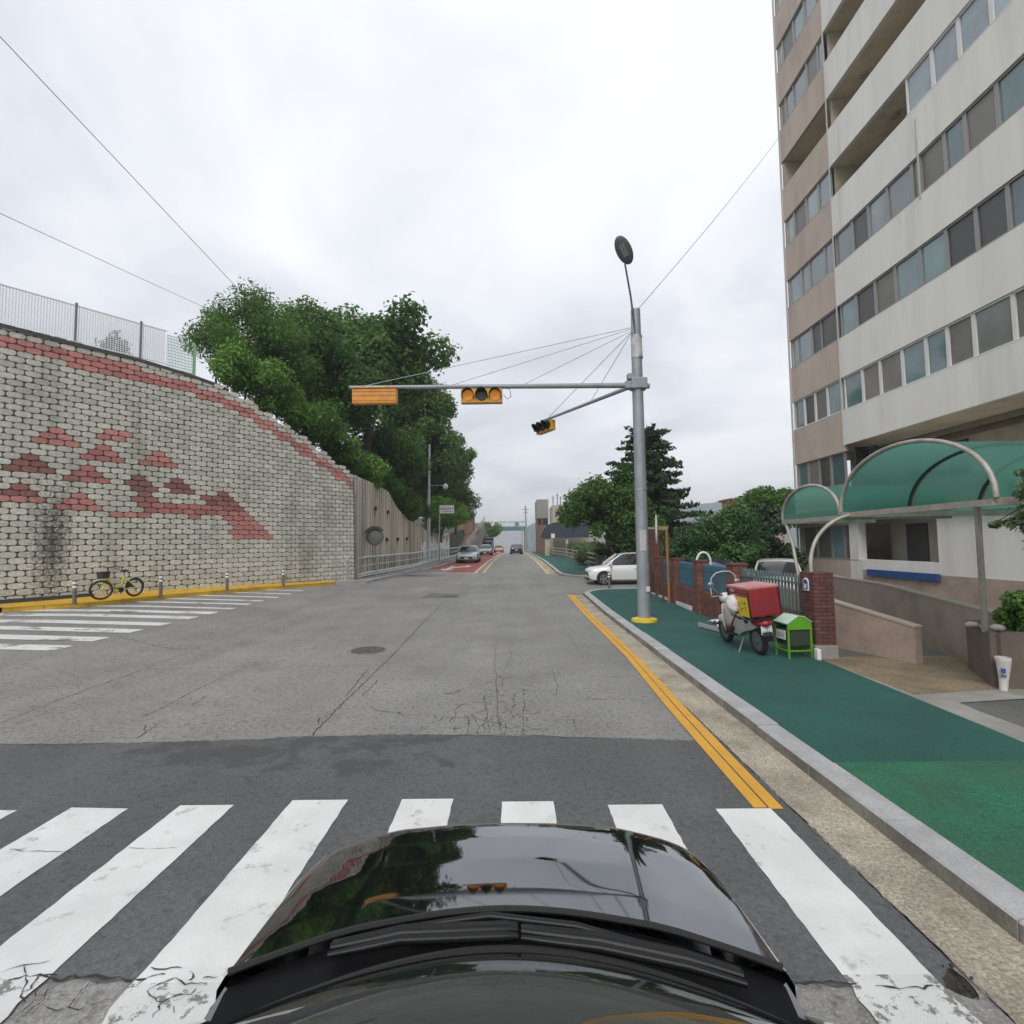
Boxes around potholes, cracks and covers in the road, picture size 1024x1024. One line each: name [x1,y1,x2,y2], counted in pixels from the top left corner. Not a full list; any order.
crack [36,609,674,745]
manhole cover [348,646,386,654]
pothole [942,963,979,1000]
crack [2,960,215,1017]
